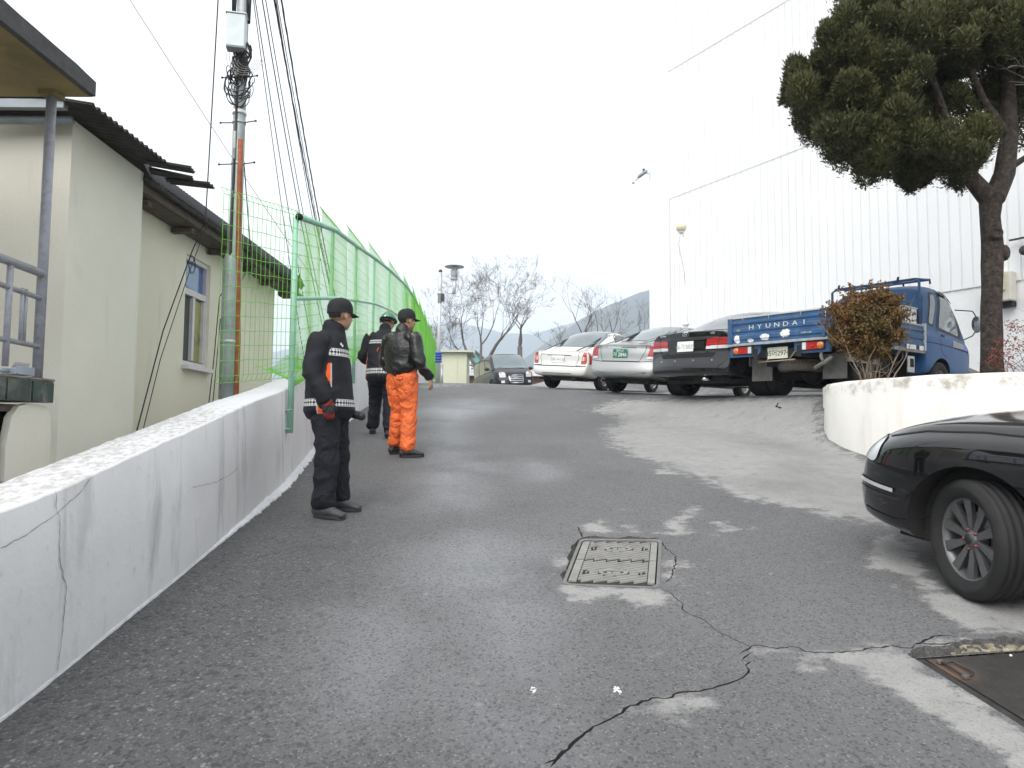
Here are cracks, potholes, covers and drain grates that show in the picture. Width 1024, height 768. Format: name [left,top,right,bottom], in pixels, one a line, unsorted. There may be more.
crack [544,543,959,767]
manhole cover [563,539,662,588]
